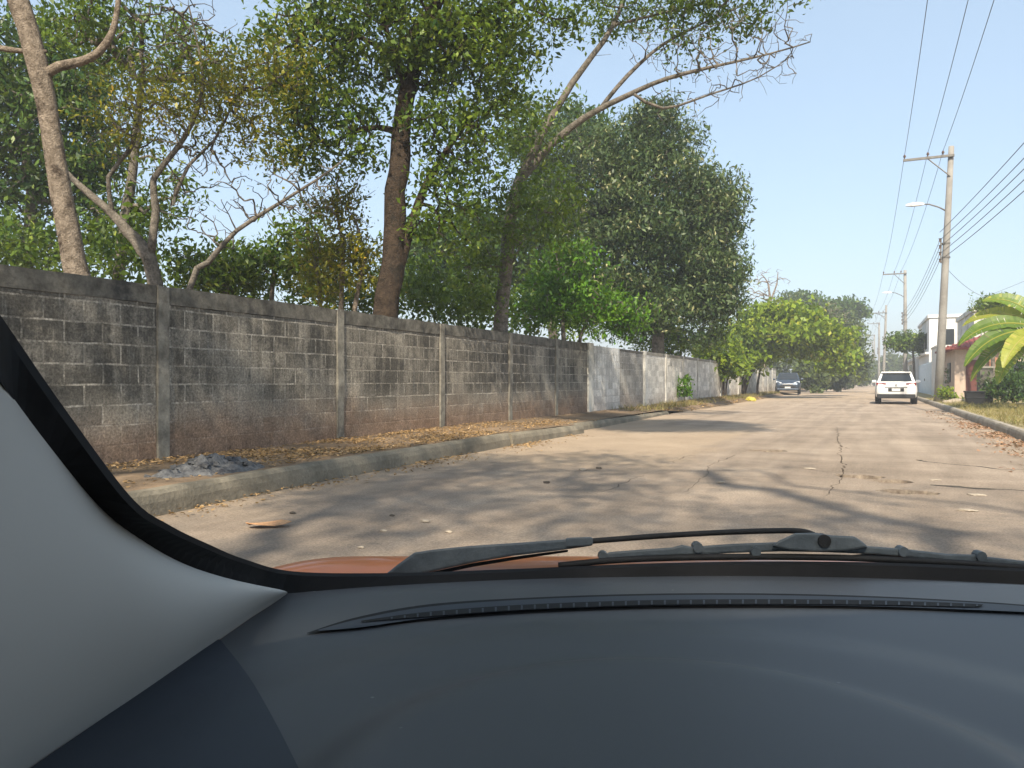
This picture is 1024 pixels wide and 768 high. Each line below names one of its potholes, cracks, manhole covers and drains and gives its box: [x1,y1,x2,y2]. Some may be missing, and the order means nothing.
crack [918,460,1024,491]
crack [603,455,734,492]
crack [810,427,854,495]
